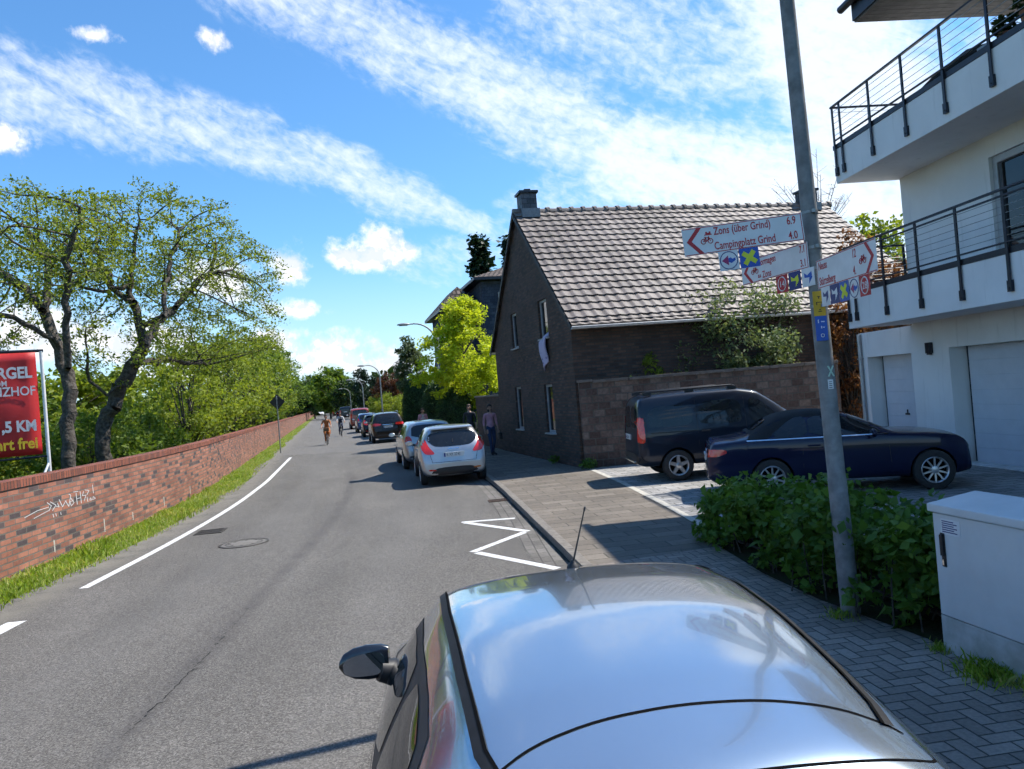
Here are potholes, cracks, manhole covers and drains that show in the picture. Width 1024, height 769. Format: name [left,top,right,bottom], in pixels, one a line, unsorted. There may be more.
crack [125,576,278,734]
manhole cover [218,538,269,549]
